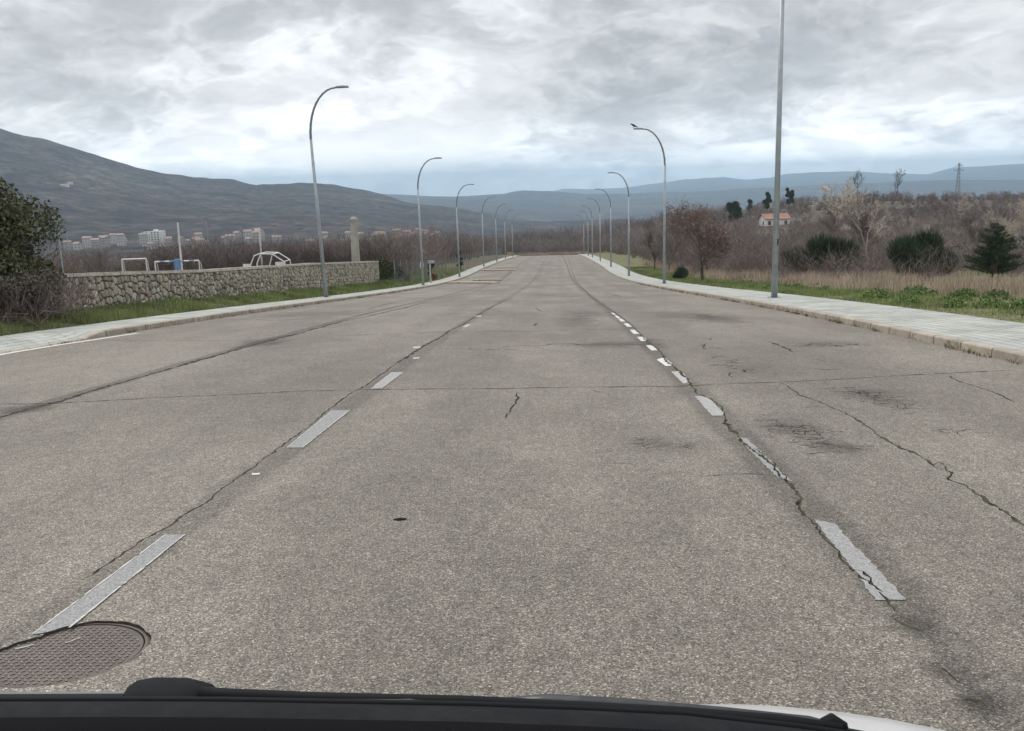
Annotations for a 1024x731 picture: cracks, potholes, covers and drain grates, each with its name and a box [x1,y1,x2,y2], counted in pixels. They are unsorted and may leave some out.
manhole cover [0,621,152,689]
crack [35,263,1024,726]
